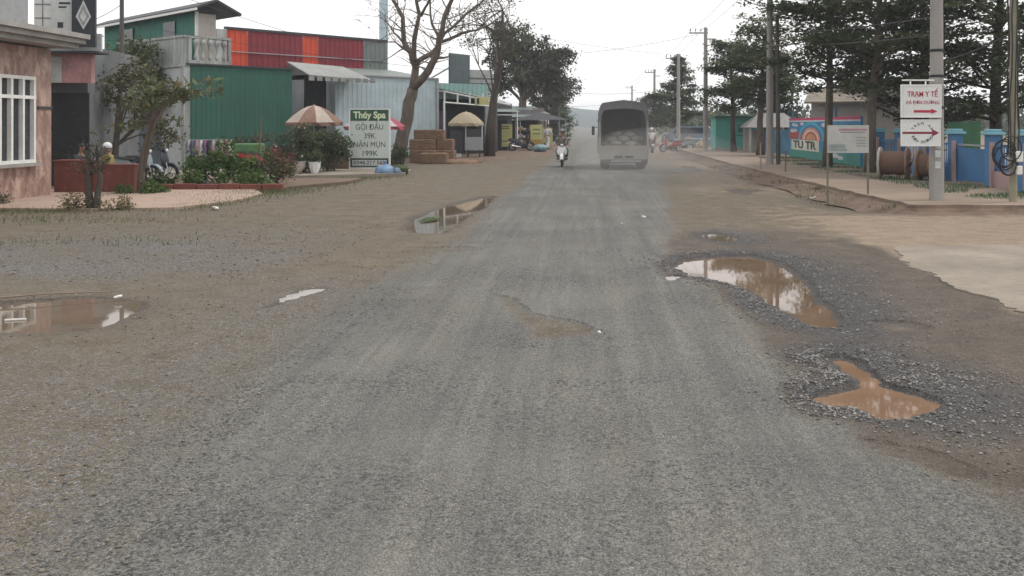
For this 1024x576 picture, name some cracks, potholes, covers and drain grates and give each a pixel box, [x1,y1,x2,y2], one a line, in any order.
pothole [0,296,150,333]
pothole [808,353,945,420]
pothole [257,286,332,309]
pothole [698,232,740,242]
pothole [400,196,498,234]
pothole [670,253,845,328]
